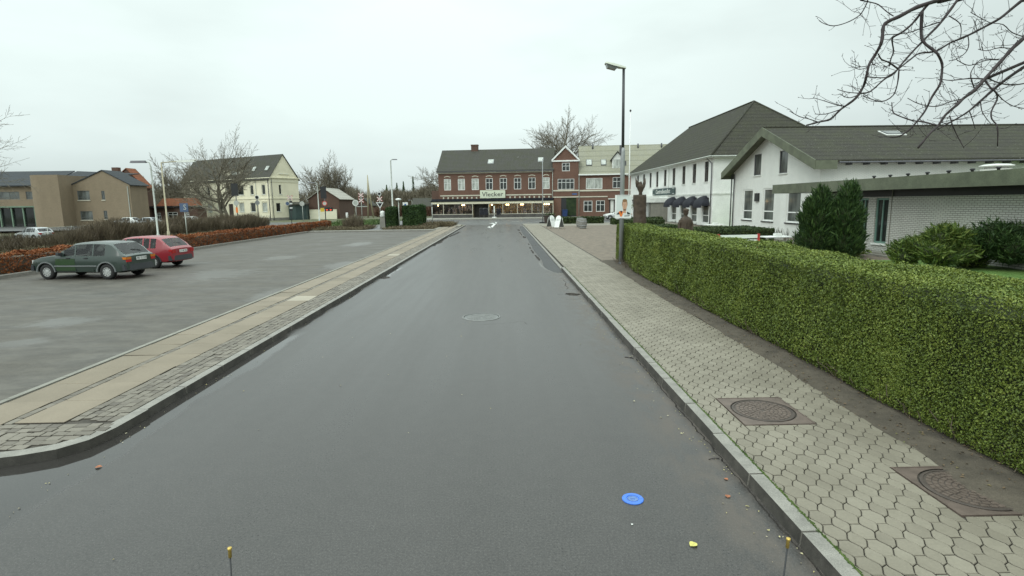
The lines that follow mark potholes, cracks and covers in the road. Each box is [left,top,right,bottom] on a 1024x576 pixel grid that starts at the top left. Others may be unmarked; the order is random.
manhole cover [462,313,501,321]
manhole cover [716,397,816,426]
manhole cover [891,466,1024,518]
